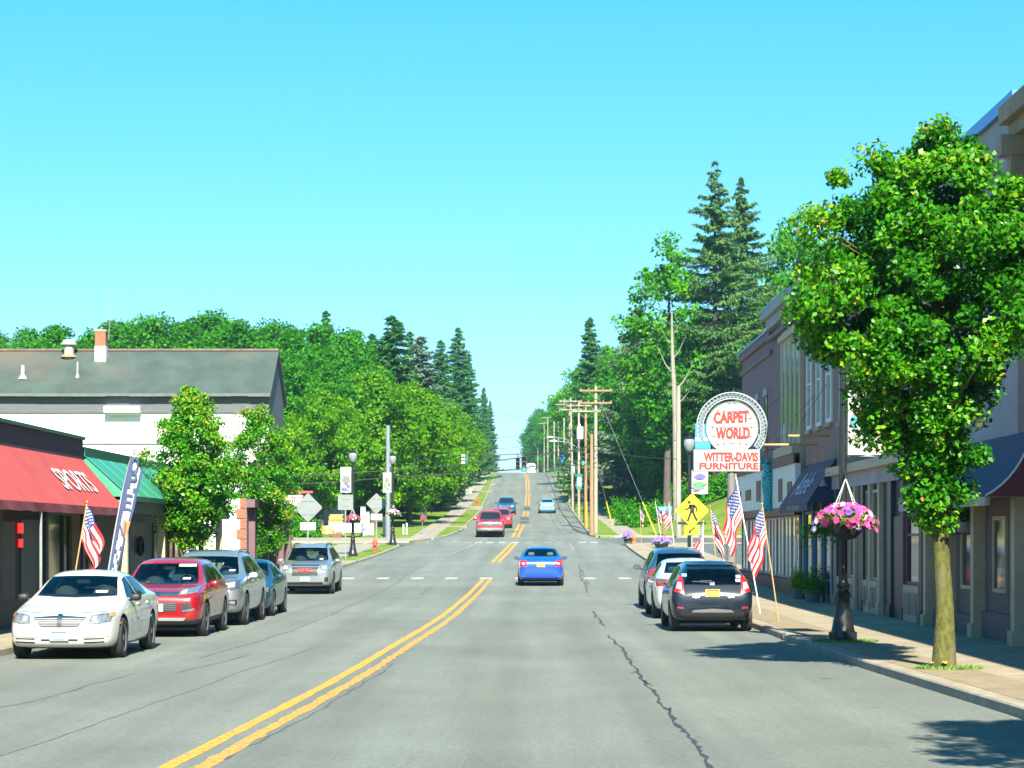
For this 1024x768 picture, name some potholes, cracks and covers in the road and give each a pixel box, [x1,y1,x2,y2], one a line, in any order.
crack [592,611,714,768]
crack [578,563,589,593]
